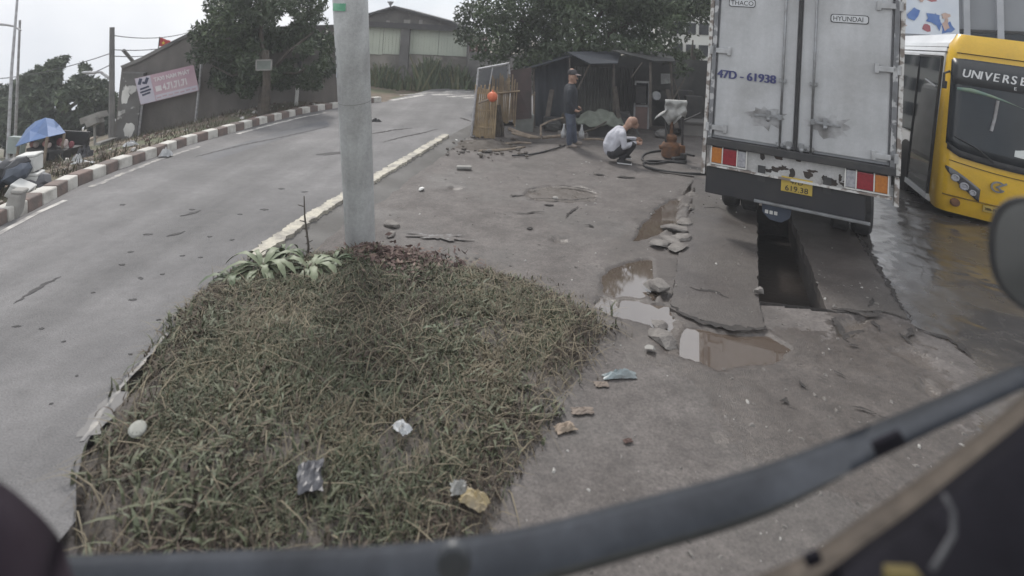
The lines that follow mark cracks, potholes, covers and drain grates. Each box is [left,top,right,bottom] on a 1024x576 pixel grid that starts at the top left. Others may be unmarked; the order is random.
crack [831,232,973,358]
pothole [602,261,647,308]
crack [670,287,766,331]
